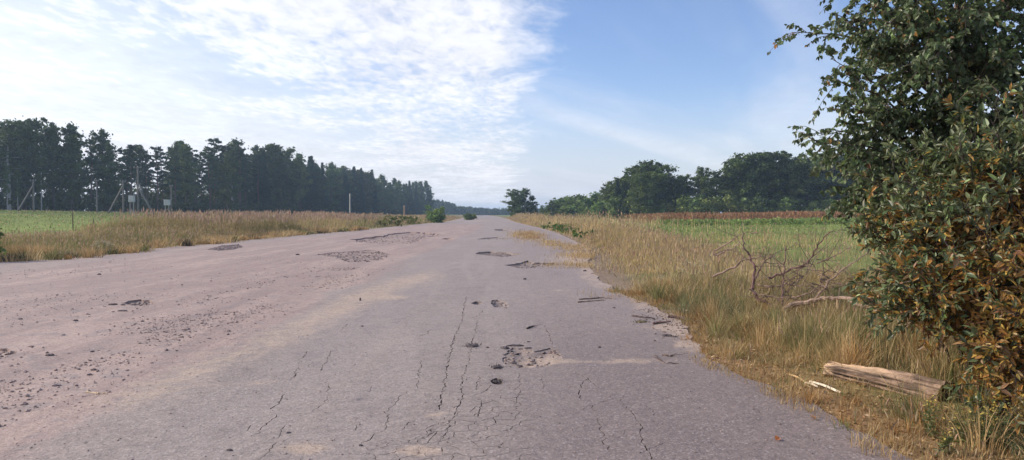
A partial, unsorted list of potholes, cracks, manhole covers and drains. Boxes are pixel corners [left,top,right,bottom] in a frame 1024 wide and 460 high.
crack [247,395,286,459]
pothole [491,300,509,308]
crack [354,311,545,460]
pothole [507,260,559,269]
pothole [502,348,562,368]
crack [574,369,663,460]
crack [291,351,331,411]
pothole [317,250,391,262]
pothole [124,299,155,307]
pothole [350,232,441,244]
